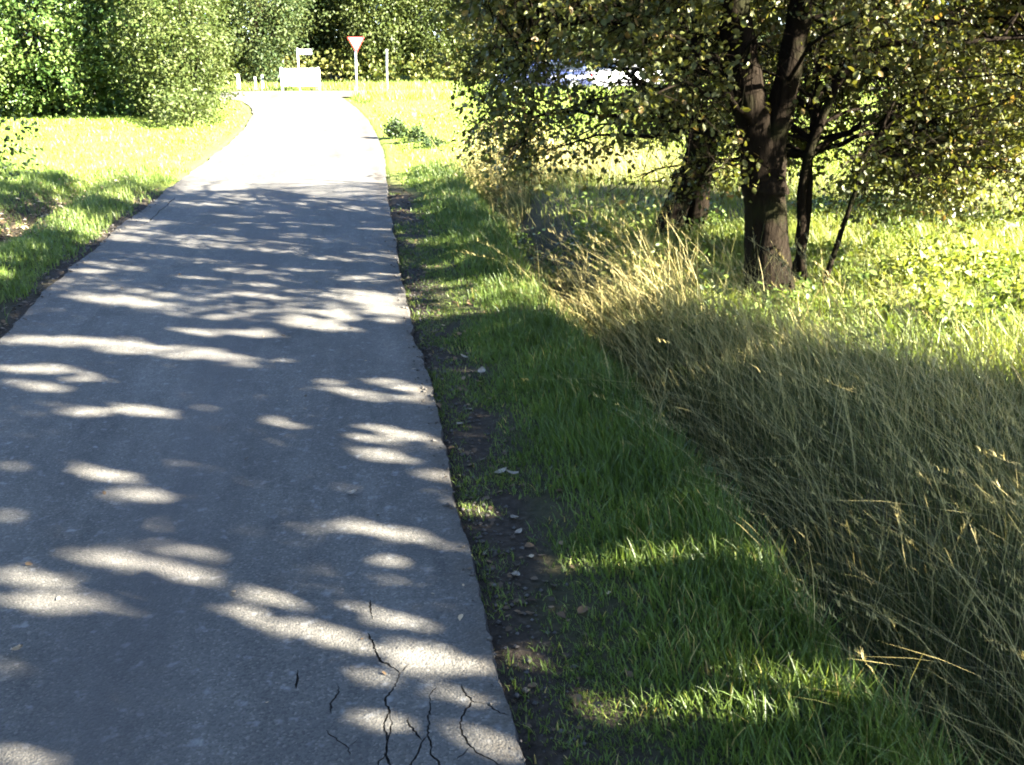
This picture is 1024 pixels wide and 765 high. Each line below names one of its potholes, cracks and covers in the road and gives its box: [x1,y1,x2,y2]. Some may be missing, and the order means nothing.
crack [326,600,507,765]
